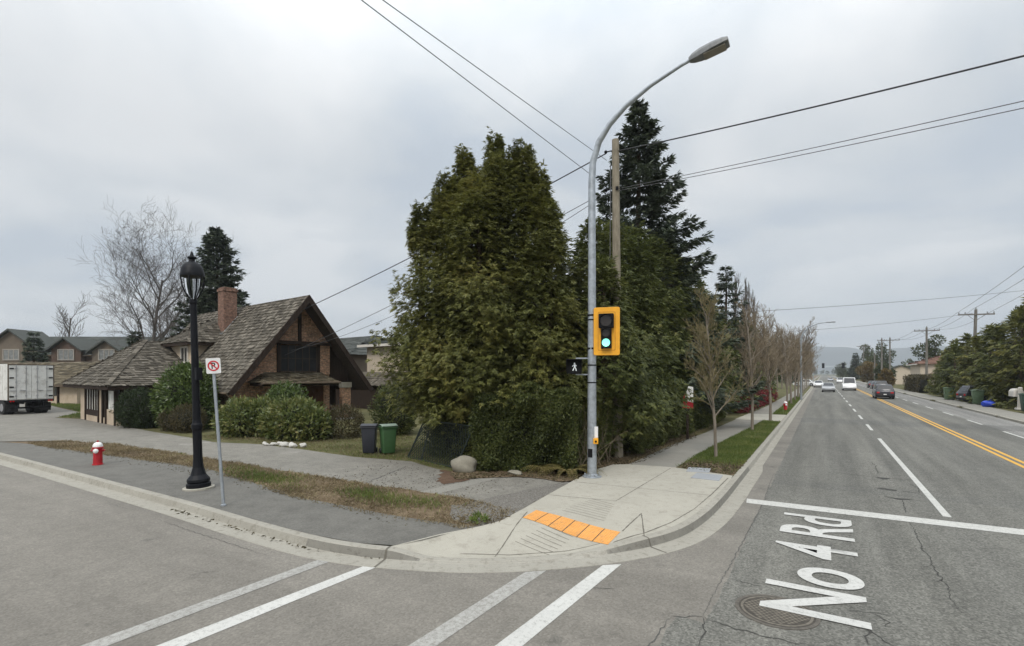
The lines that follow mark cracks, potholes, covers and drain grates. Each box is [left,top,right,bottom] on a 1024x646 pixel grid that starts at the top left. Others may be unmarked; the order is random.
manhole cover [735,594,821,630]
